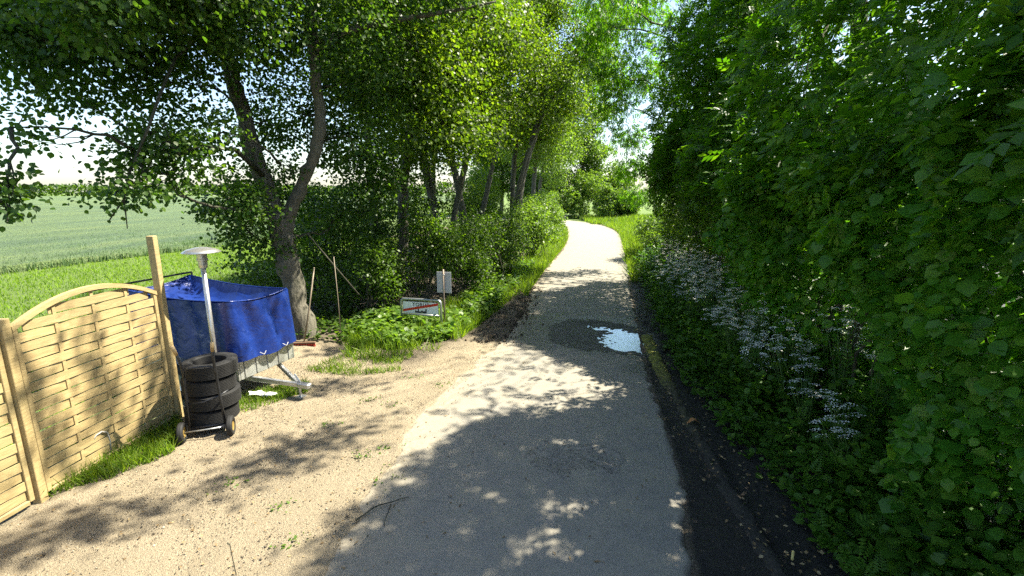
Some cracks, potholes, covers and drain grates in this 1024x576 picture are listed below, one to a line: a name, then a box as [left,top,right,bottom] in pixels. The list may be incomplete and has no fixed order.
pothole [547,318,666,358]
